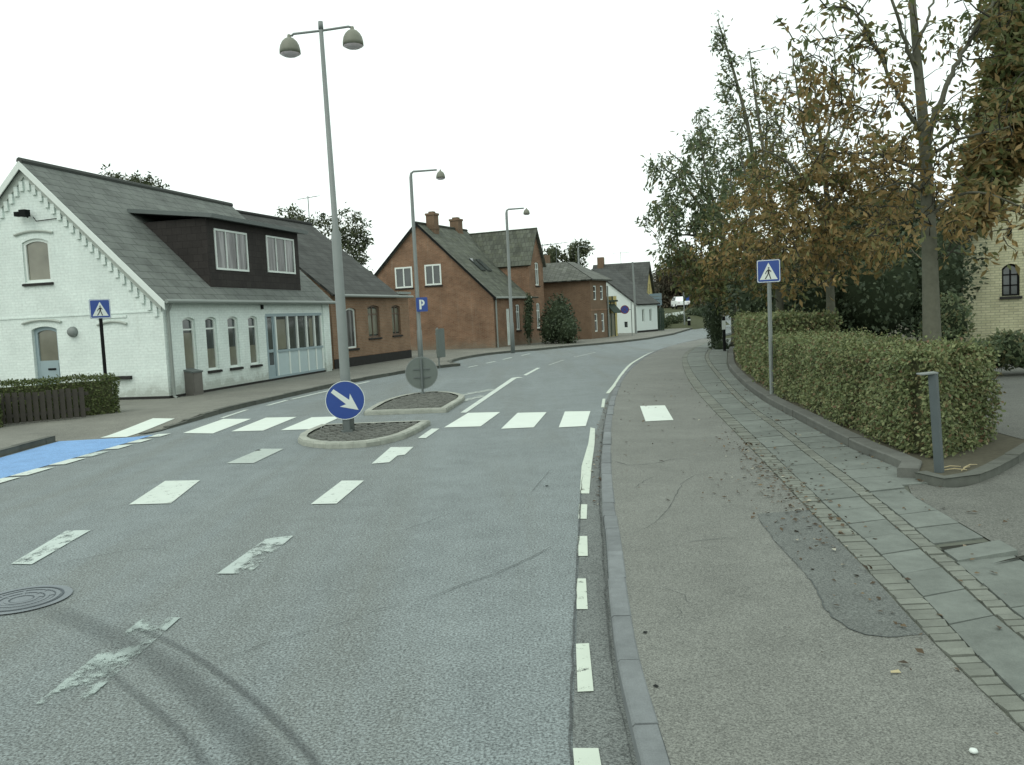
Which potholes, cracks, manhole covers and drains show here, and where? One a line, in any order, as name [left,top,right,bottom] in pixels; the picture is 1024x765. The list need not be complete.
crack [429,545,555,598]
manhole cover [0,585,73,615]
